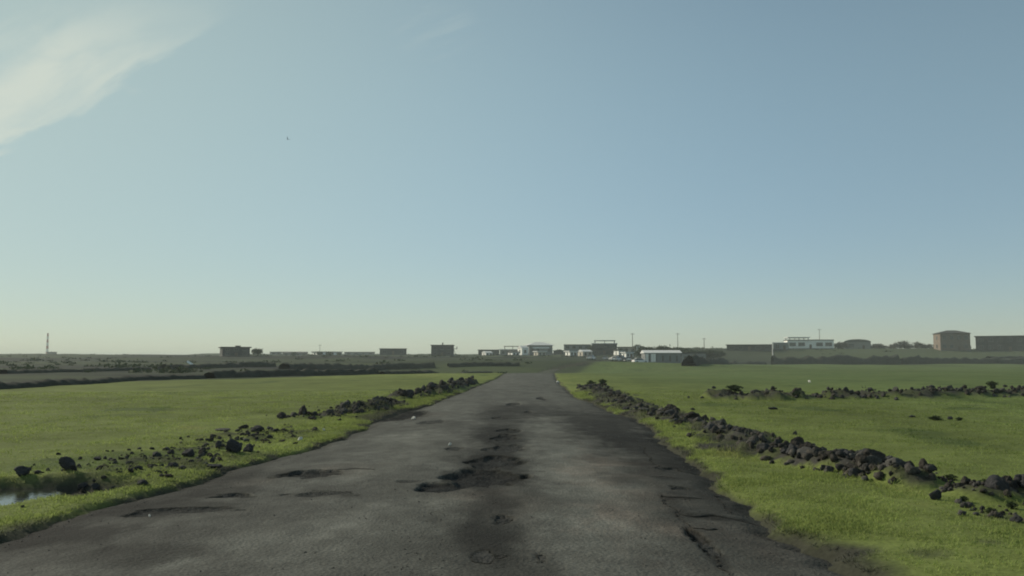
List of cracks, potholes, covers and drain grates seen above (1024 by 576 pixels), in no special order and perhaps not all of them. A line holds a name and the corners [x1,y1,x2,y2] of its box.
pothole [267,469,348,479]
pothole [493,515,513,525]
pothole [482,444,527,453]
pothole [415,482,460,493]
pothole [471,549,504,563]
pothole [468,456,527,471]
pothole [122,507,245,518]
pothole [439,468,523,489]
crack [640,445,774,542]
